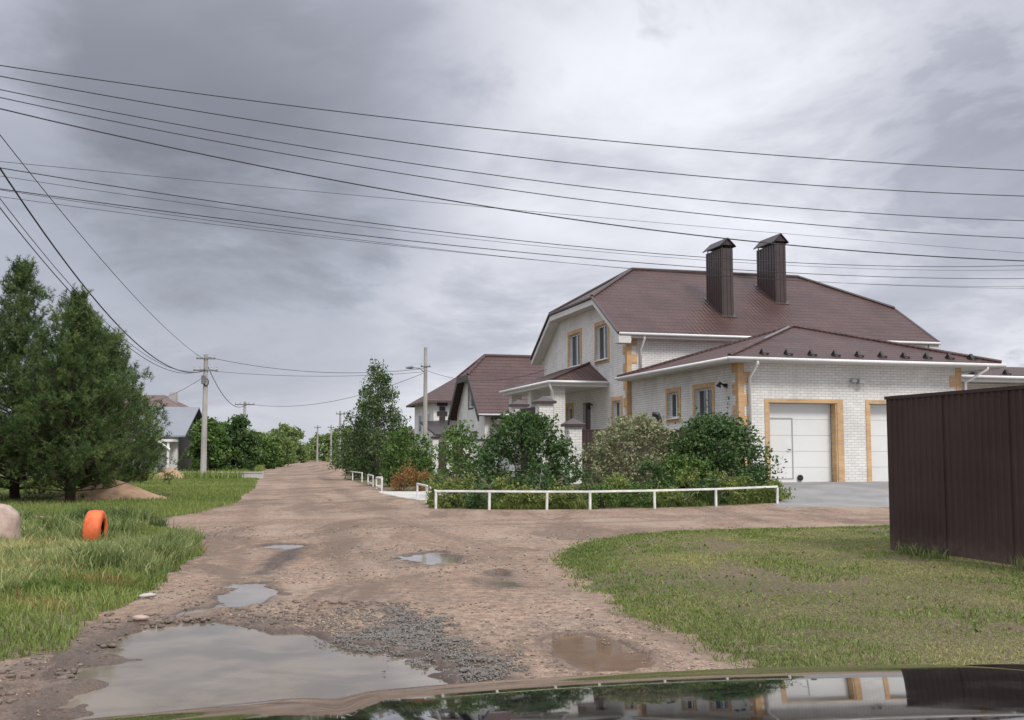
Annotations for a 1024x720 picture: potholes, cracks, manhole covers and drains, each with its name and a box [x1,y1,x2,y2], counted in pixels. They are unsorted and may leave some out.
pothole [539,631,666,675]
pothole [256,542,313,550]
pothole [165,580,296,618]
pothole [384,550,474,567]
pothole [0,615,467,720]
pothole [483,568,518,578]
